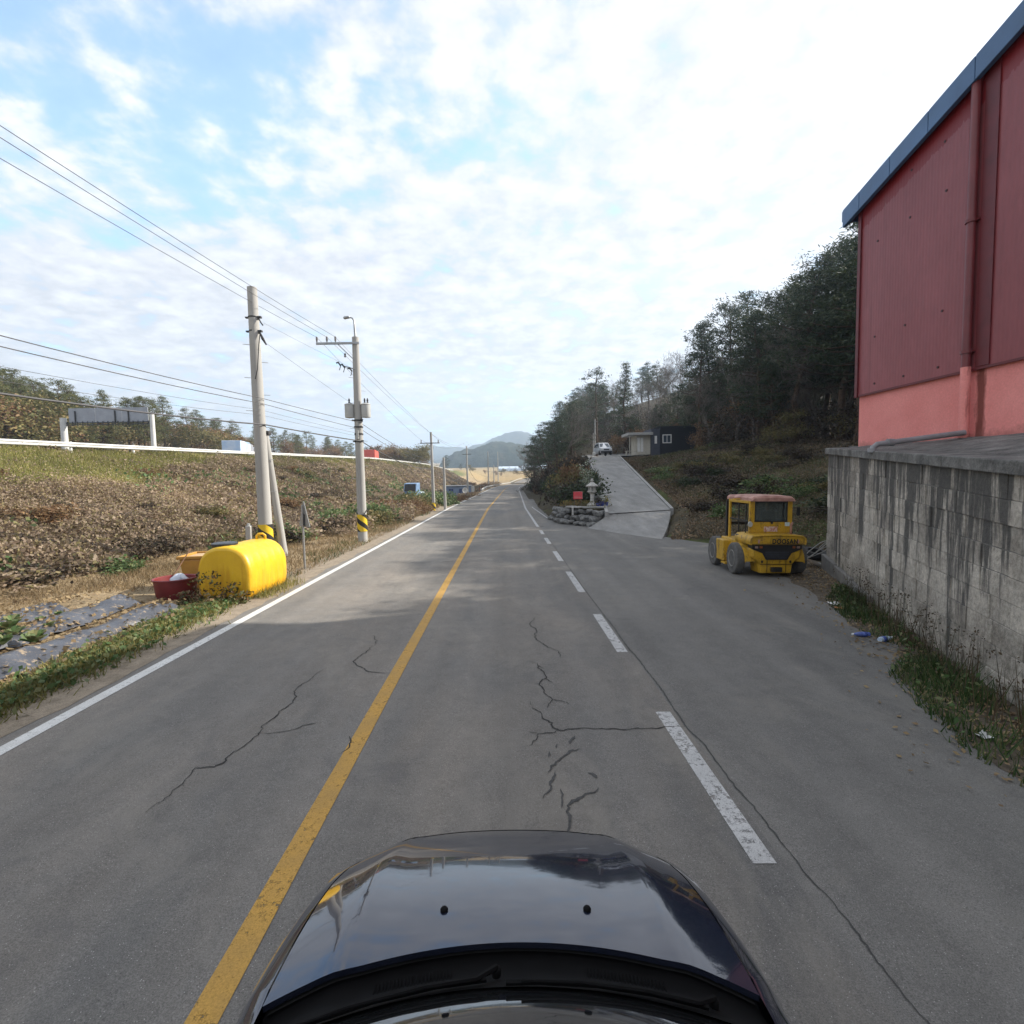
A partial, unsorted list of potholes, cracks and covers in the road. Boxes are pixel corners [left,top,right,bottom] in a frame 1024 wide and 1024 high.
crack [146,671,320,812]
crack [528,620,685,831]
